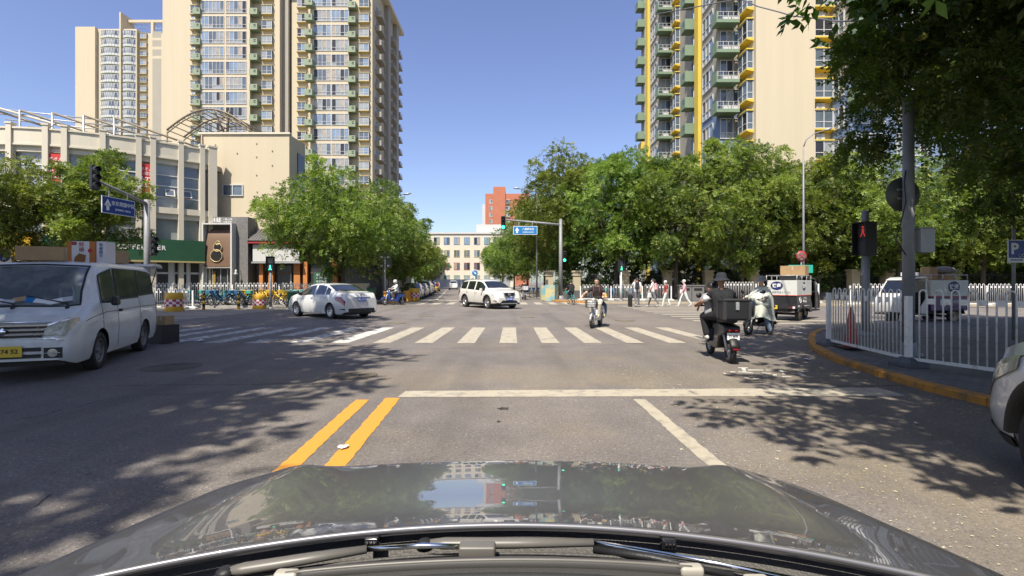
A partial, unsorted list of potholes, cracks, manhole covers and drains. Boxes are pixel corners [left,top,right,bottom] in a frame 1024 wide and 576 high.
manhole cover [139,363,203,372]
